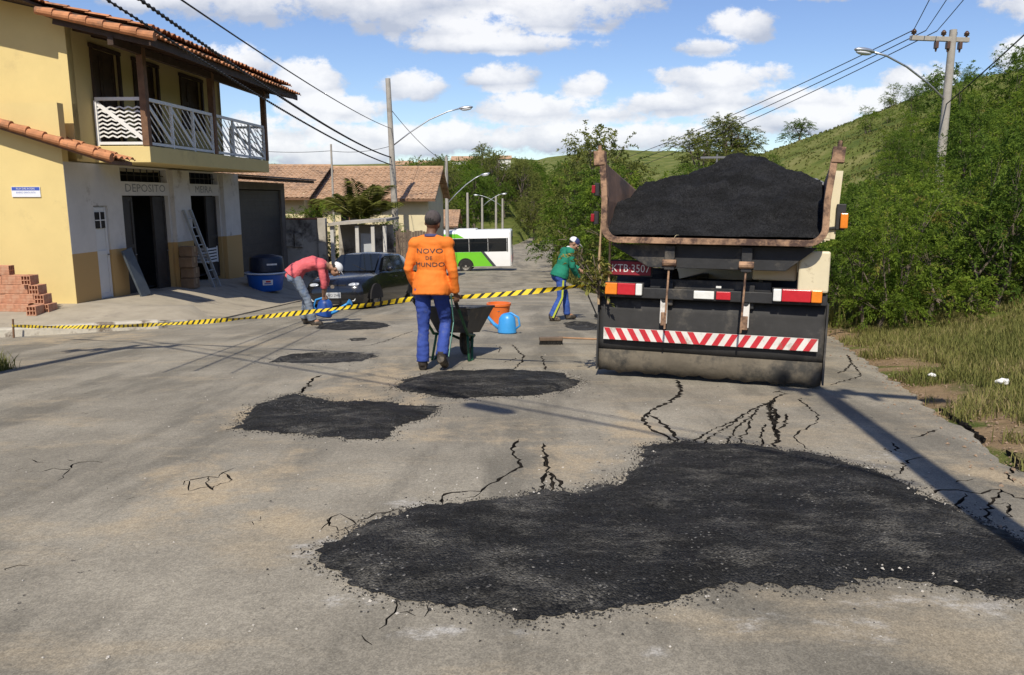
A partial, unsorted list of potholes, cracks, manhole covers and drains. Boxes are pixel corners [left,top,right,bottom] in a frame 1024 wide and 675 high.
crack [19,459,99,481]
crack [498,345,547,371]
crack [884,408,1024,523]
crack [440,439,523,505]
crack [641,355,861,450]
crack [298,375,322,395]
crack [180,469,233,495]
crack [362,601,429,645]
crack [540,443,564,491]
